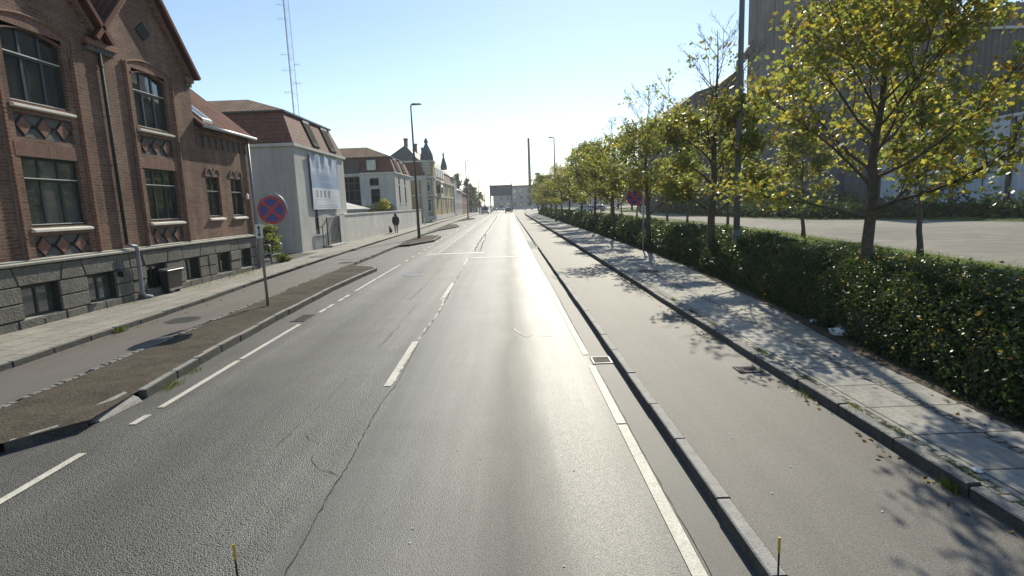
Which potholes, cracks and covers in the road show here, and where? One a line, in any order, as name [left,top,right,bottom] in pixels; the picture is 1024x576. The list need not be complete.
drain grate [590,356,613,365]
